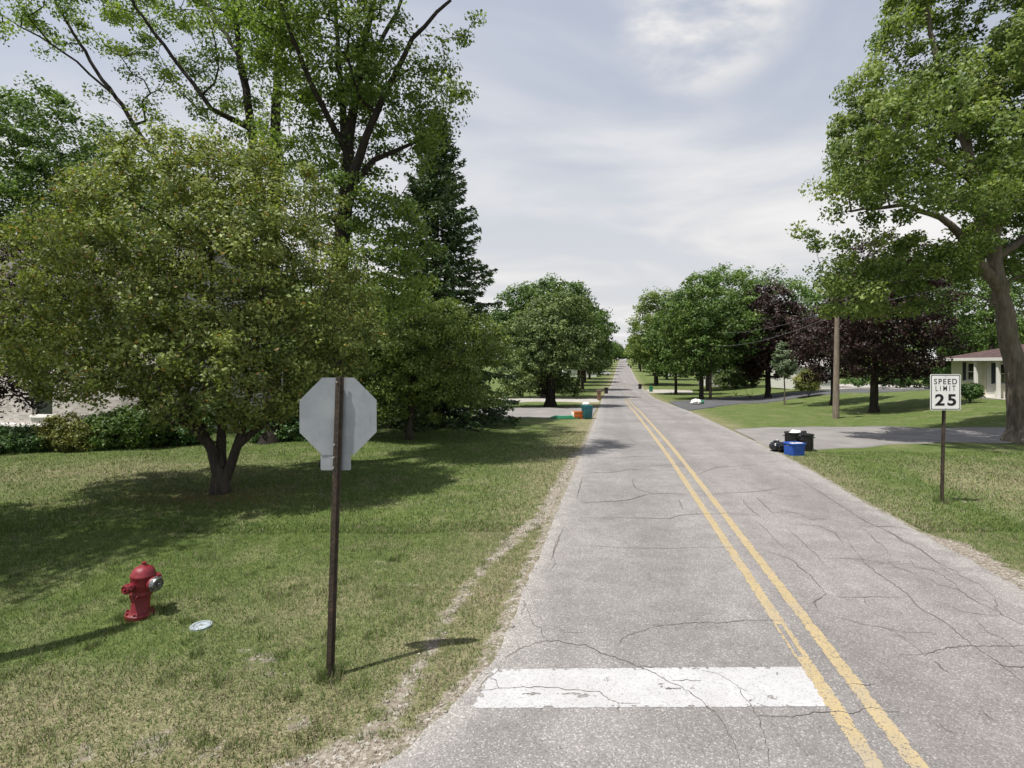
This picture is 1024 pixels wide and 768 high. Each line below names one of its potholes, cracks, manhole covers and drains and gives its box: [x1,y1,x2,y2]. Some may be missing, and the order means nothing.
utility cover [189,620,212,632]
crack [506,602,899,768]
crack [578,443,1024,682]
